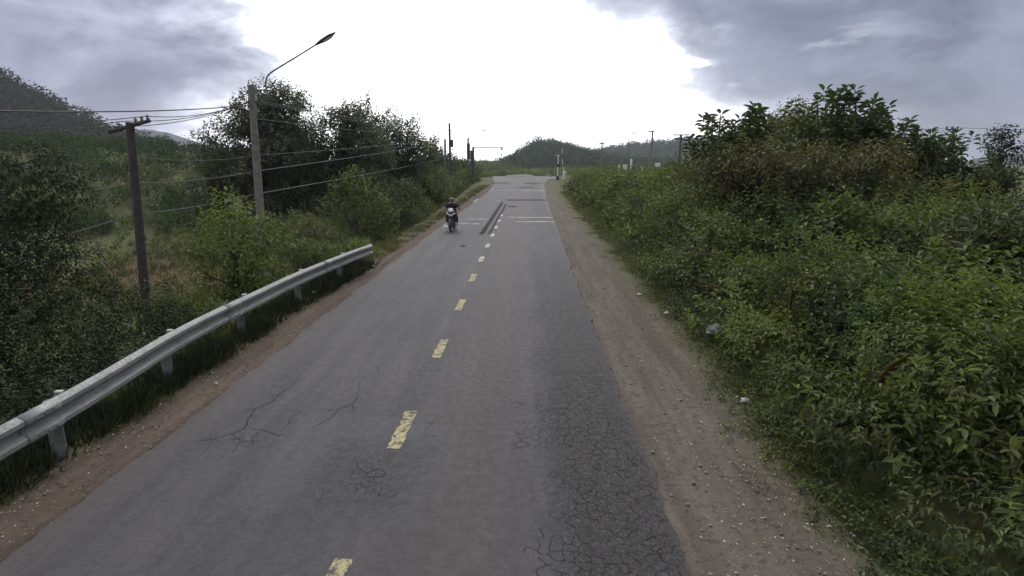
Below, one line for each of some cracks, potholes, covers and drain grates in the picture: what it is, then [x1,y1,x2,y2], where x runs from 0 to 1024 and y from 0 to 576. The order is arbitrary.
crack [199,378,298,451]
crack [510,370,681,576]
crack [345,460,395,498]
